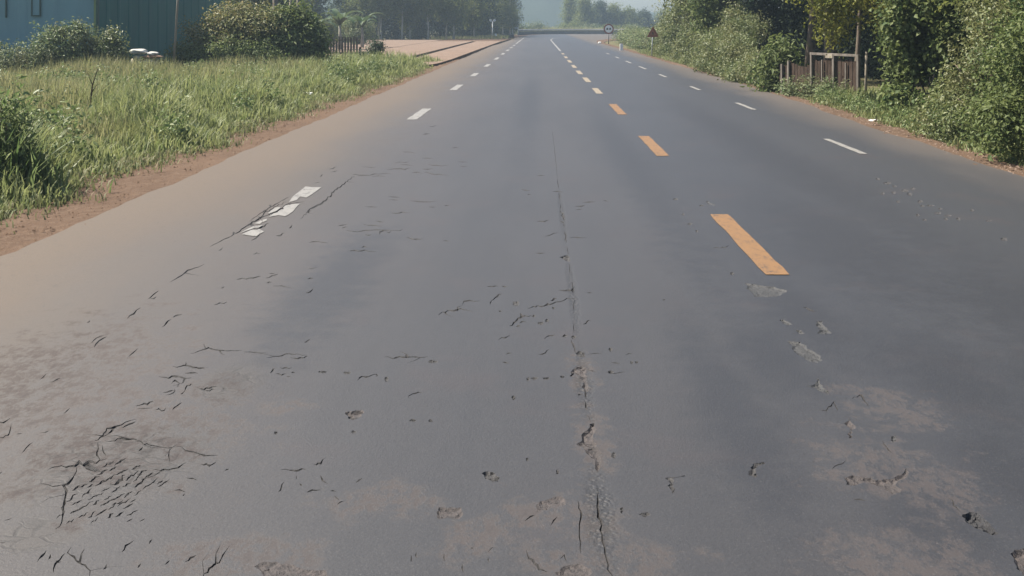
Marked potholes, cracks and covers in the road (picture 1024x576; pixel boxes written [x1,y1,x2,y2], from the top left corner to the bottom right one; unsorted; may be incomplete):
pothole [844,469,909,494]
pothole [816,321,831,334]
pothole [745,283,787,297]
pothole [962,512,999,535]
crack [358,351,428,380]
crack [128,126,466,326]
pothole [482,471,500,482]
crack [440,286,591,364]
pothole [345,410,364,420]
pothole [788,341,822,363]
pothole [437,507,463,519]
